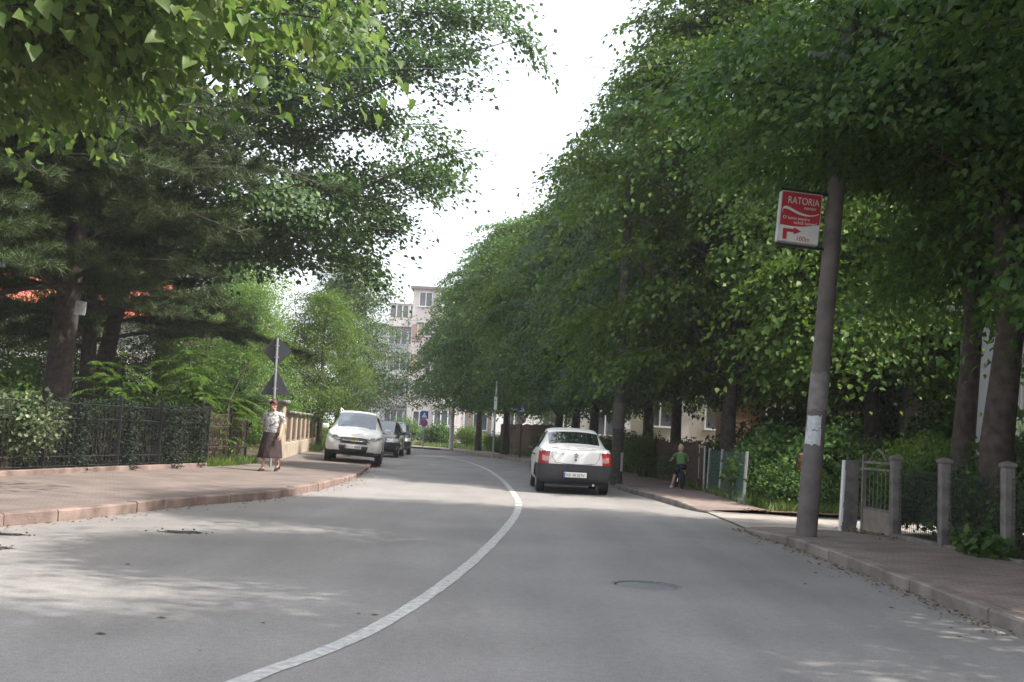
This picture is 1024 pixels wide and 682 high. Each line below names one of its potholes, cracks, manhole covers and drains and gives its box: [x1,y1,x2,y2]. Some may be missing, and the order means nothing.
manhole cover [611,581,682,590]
